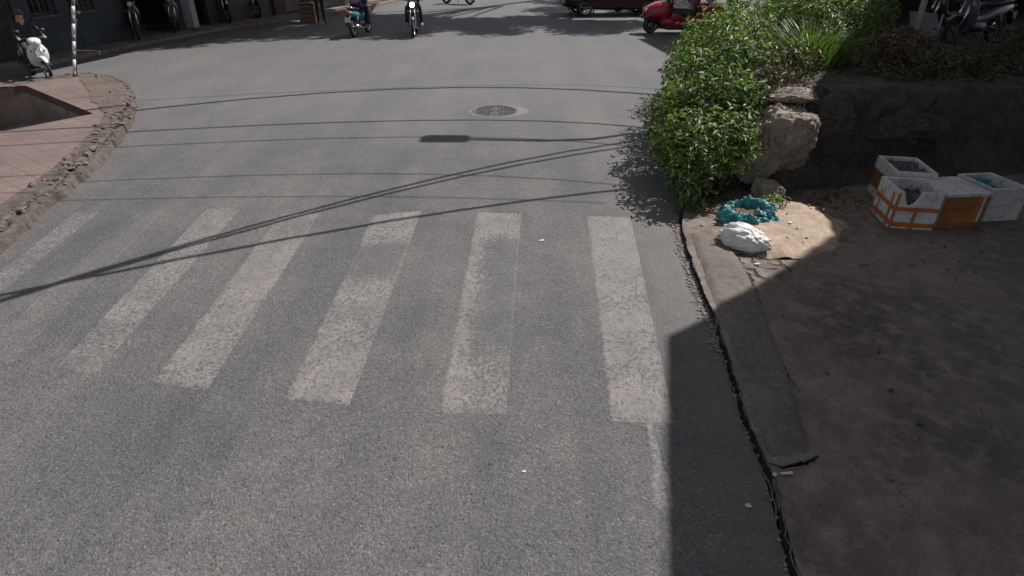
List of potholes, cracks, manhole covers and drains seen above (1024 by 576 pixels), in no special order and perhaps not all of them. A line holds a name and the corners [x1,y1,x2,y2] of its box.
manhole cover [469,105,529,118]
